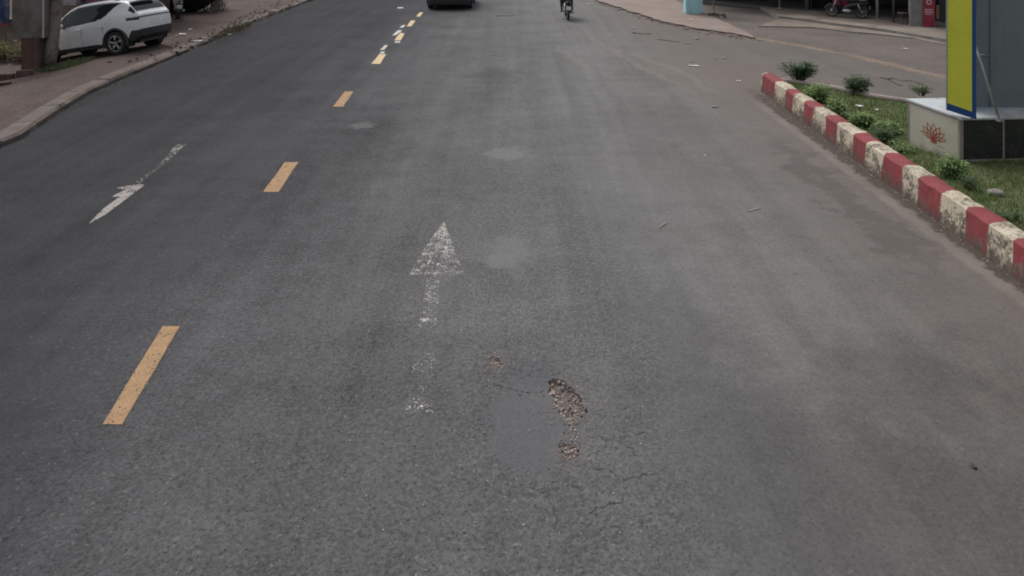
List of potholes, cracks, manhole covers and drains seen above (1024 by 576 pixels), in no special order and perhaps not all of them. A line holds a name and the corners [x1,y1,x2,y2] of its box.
crack [525,432,654,530]
pothole [558,442,581,460]
pothole [488,355,507,369]
pothole [547,378,591,423]
